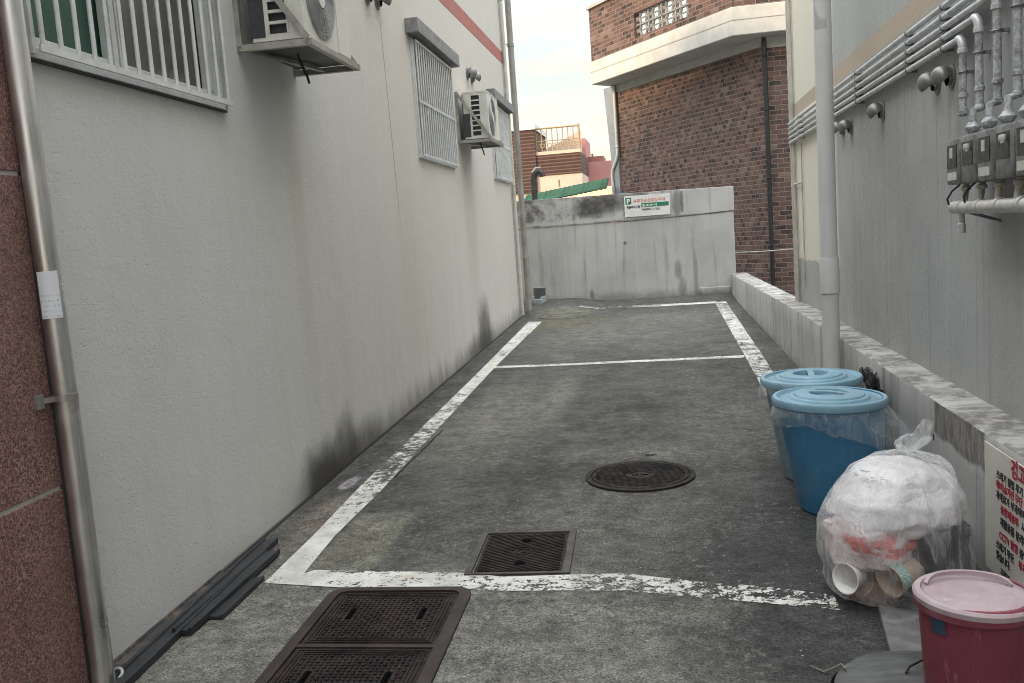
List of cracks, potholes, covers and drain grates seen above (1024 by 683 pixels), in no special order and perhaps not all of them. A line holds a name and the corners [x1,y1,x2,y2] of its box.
manhole cover [254,586,471,683]
manhole cover [586,460,696,493]
